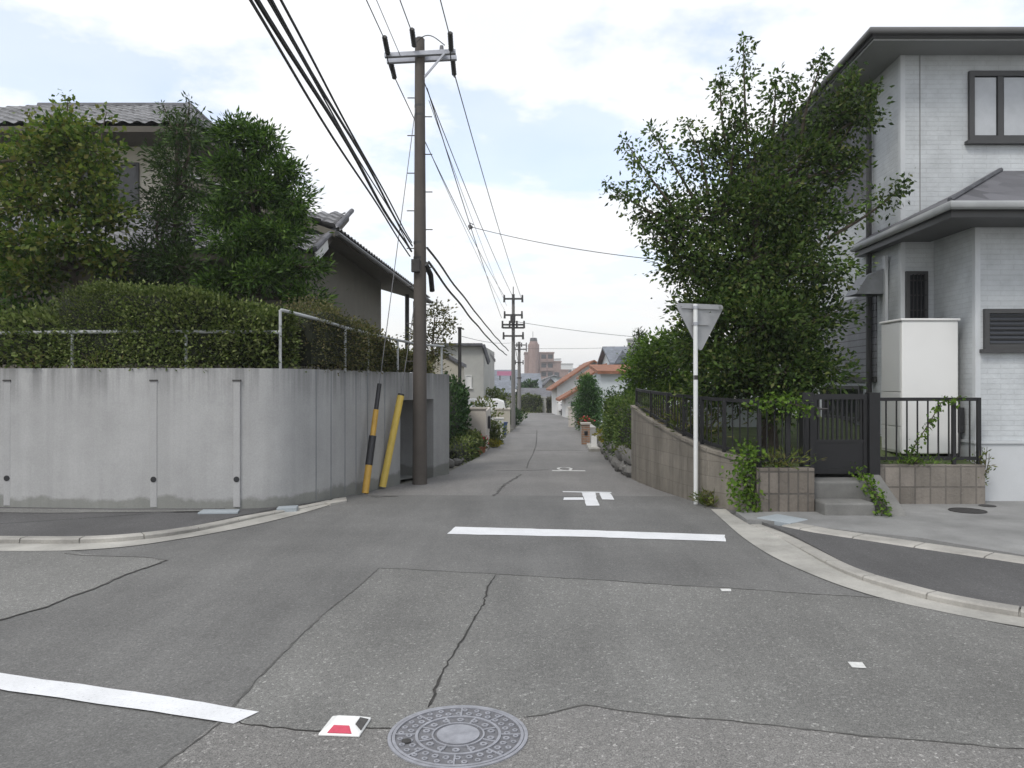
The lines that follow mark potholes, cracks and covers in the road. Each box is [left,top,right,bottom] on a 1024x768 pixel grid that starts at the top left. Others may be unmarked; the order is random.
crack [492,434,537,496]
manhole cover [387,705,528,768]
crack [526,704,1024,749]
crack [158,568,882,768]
crack [0,553,167,620]
